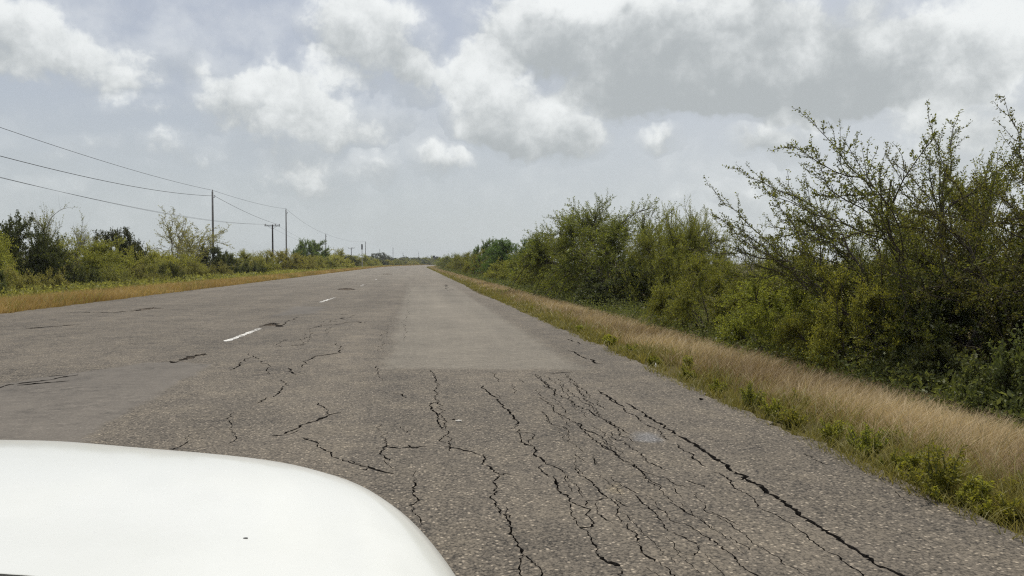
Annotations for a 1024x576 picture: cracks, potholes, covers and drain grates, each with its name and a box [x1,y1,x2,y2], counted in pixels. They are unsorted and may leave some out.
crack [272,370,544,576]
crack [0,375,76,388]
crack [27,311,125,329]
crack [481,372,910,576]
